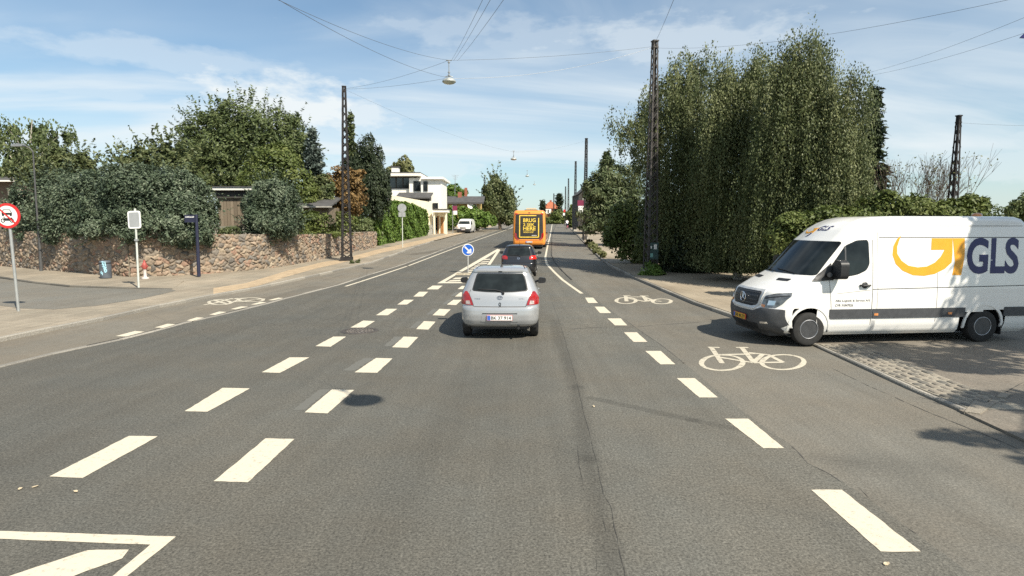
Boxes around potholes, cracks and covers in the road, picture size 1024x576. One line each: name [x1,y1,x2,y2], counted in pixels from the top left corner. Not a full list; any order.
crack [554,308,626,576]
